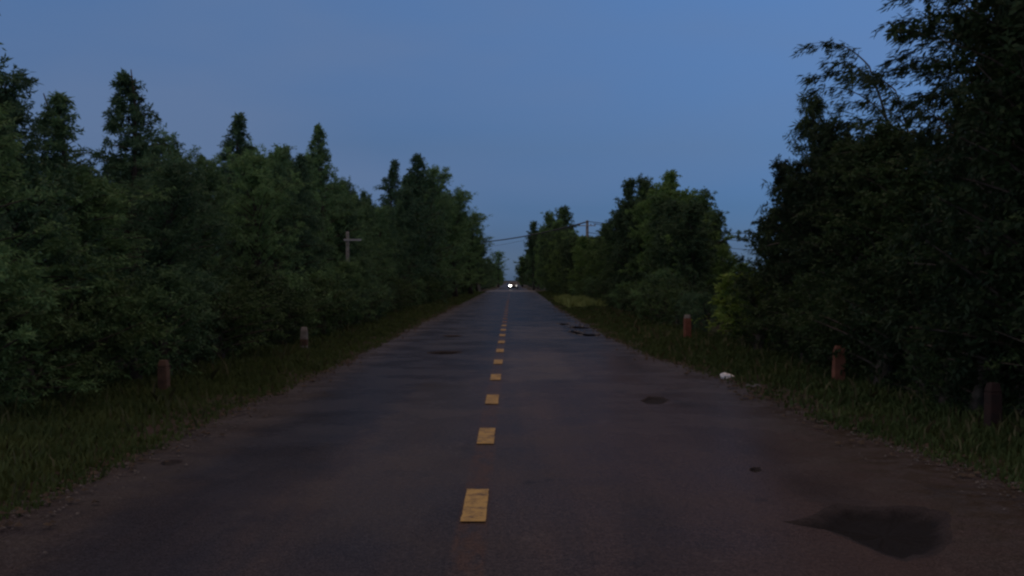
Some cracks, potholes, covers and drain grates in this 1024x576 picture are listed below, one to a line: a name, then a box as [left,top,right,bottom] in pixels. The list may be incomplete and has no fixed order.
pothole [641,396,669,404]
pothole [782,503,953,562]
